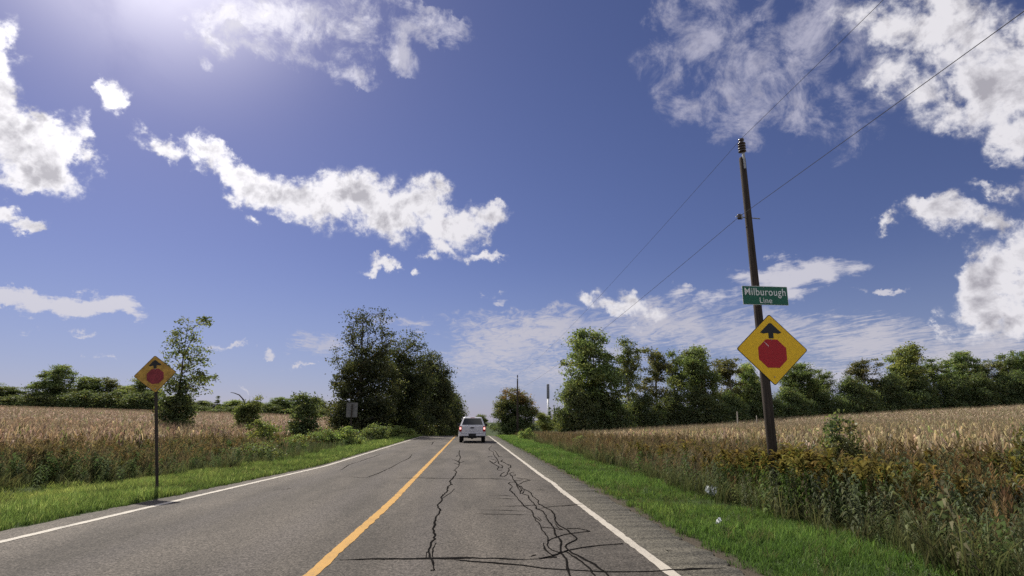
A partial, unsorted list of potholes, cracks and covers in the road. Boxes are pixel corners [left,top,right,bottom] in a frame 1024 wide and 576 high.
crack [342,557,726,572]
crack [450,478,578,515]
